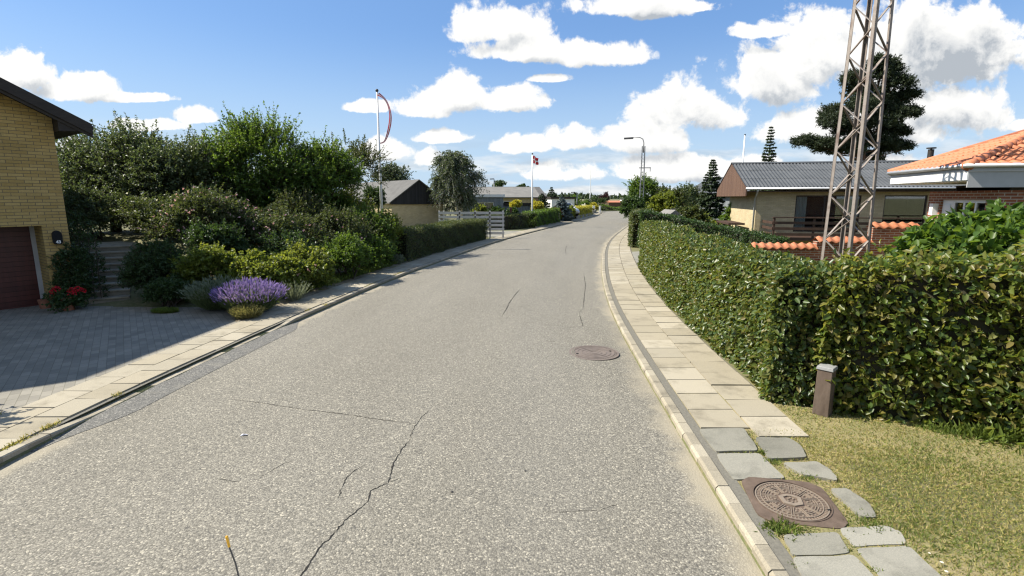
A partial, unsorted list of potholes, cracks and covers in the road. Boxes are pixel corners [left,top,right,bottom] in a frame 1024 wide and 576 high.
crack [234,399,426,576]
manhole cover [569,345,619,361]
manhole cover [742,477,848,529]
